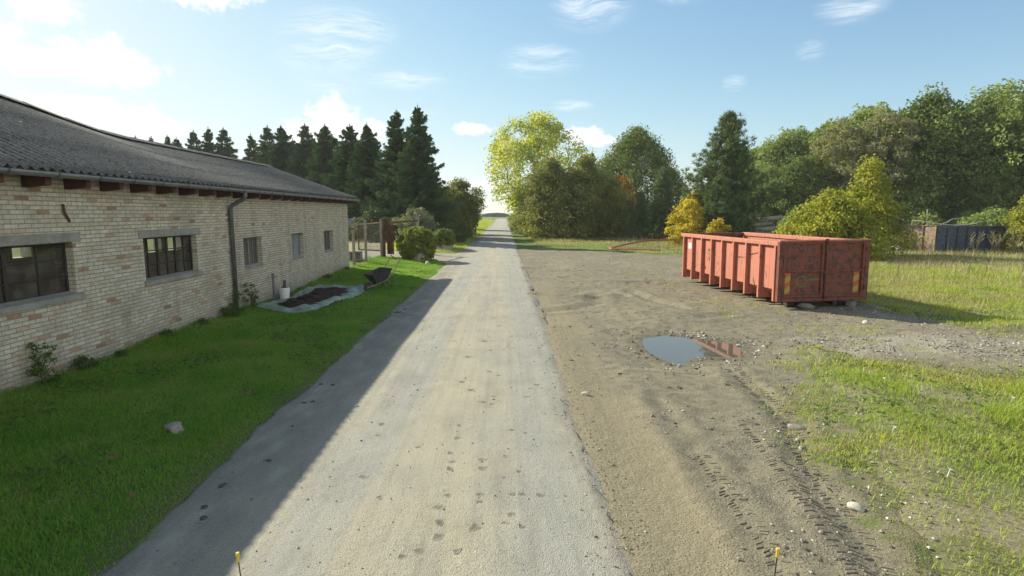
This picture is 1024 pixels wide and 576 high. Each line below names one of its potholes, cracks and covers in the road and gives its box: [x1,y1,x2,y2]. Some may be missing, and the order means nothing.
pothole [616,329,775,370]
